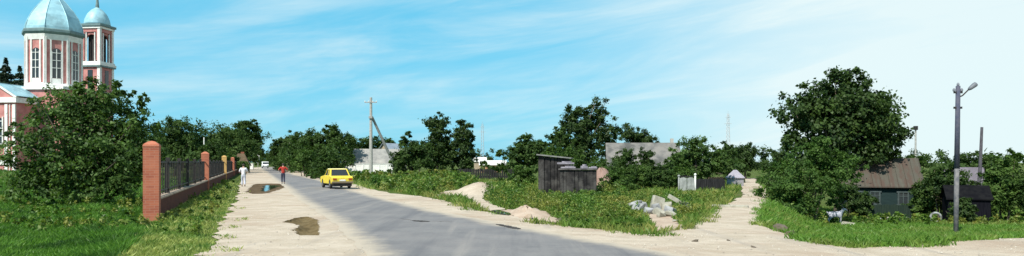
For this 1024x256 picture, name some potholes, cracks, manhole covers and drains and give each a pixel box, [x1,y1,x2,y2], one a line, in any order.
pothole [244,183,284,194]
pothole [285,217,320,235]
